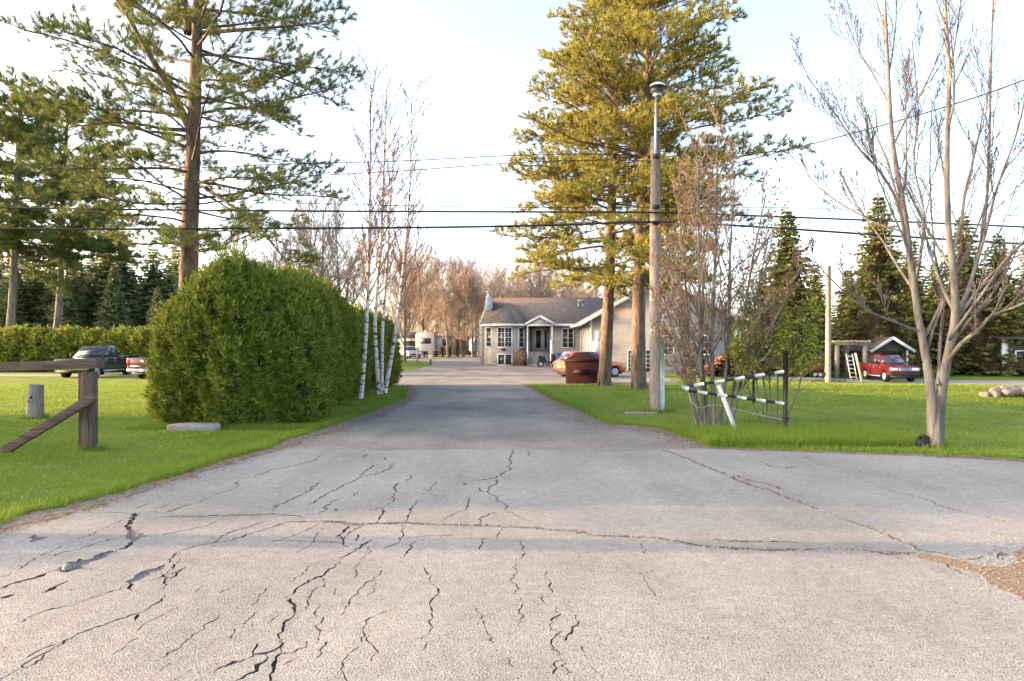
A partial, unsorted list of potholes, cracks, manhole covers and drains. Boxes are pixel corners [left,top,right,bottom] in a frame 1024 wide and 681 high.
crack [870,485,1020,525]
crack [845,520,986,577]
crack [0,450,813,681]
